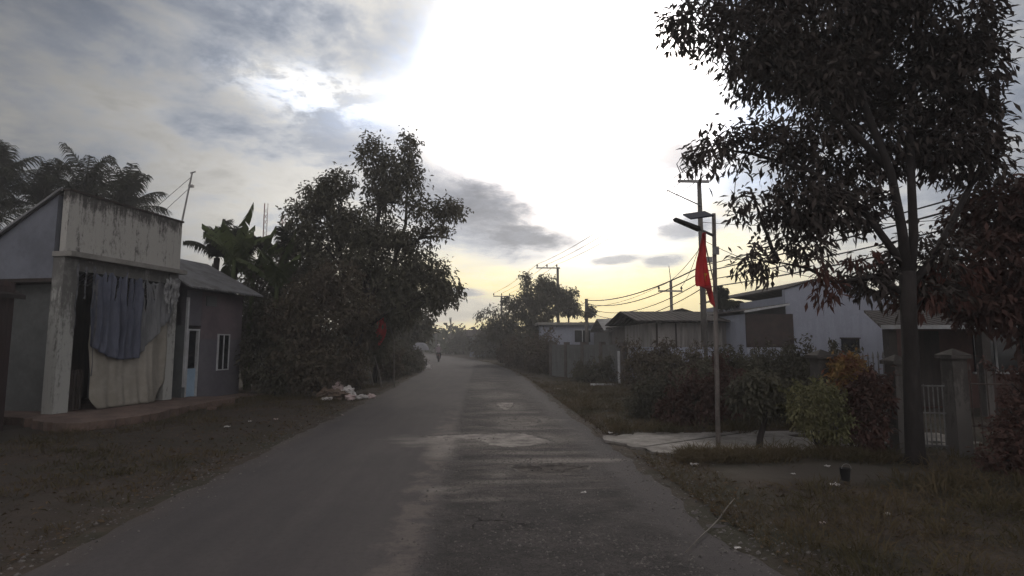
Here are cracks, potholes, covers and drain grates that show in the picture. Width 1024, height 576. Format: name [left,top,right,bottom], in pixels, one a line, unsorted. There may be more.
crack [468,510,532,532]
